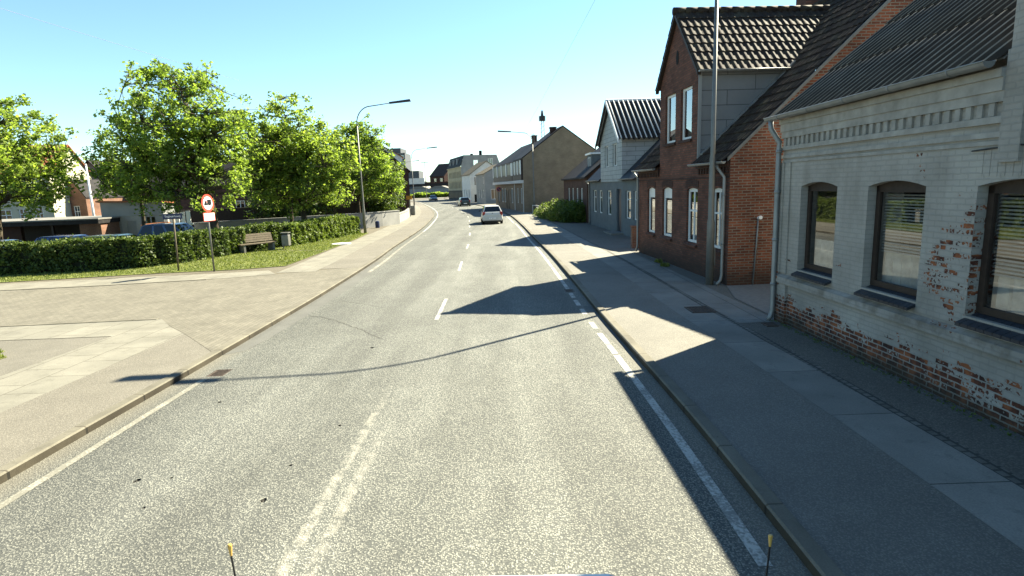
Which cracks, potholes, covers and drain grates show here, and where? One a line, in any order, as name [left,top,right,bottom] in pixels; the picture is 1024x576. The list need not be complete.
drain grate [206,369,233,377]
